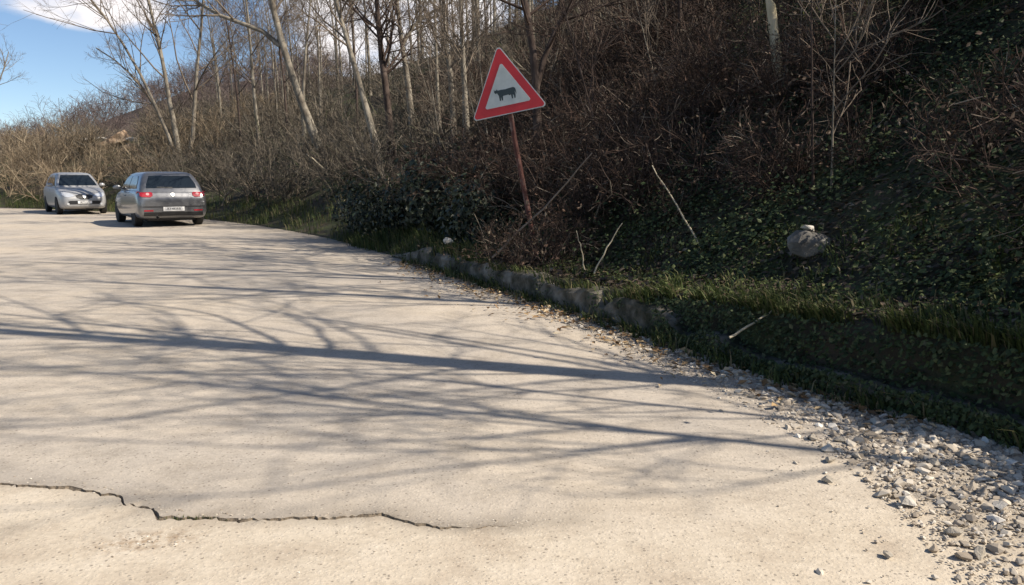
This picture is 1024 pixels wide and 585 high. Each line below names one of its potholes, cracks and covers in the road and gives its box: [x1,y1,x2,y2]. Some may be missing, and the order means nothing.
crack [0,483,514,530]
